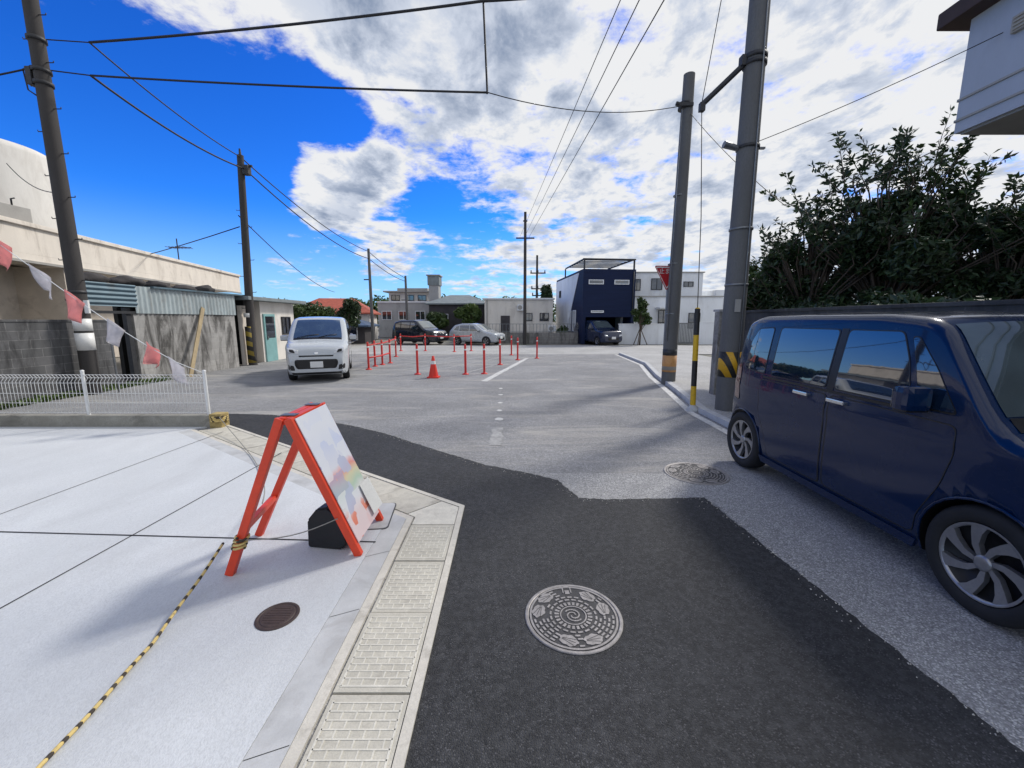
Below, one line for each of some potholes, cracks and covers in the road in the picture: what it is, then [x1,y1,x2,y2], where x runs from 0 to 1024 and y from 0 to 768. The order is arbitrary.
manhole cover [525,585,623,655]
manhole cover [663,462,730,485]
